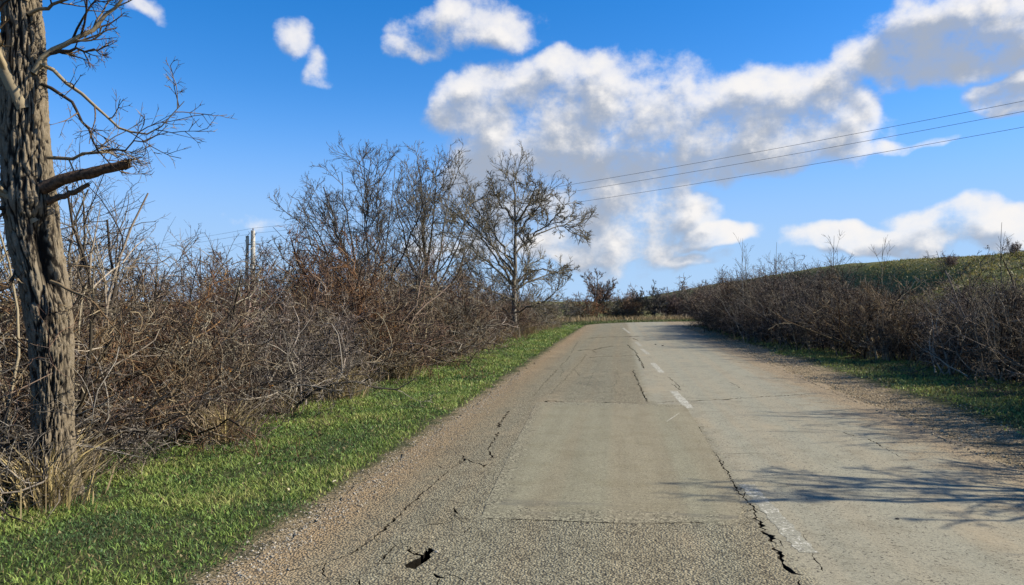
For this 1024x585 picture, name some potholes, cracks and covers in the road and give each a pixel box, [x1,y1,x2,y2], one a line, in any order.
crack [536,335,653,403]
crack [284,411,510,585]
crack [698,426,823,585]
pothole [405,546,433,569]
